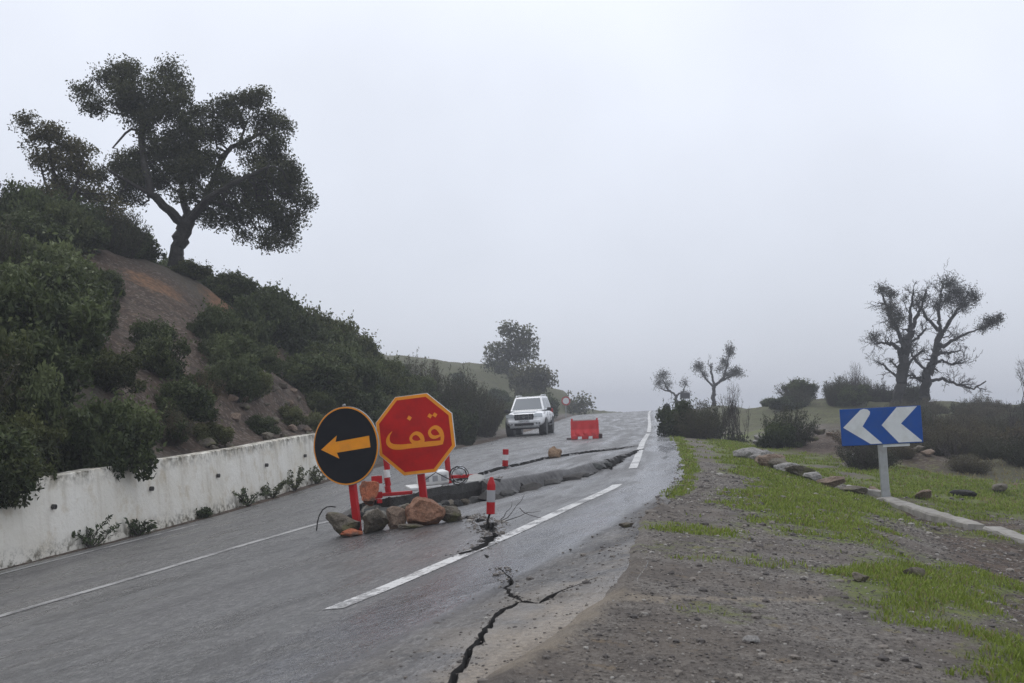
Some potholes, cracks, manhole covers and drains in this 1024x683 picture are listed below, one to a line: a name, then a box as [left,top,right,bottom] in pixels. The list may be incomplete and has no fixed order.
crack [452,446,643,495]
crack [448,531,592,683]
